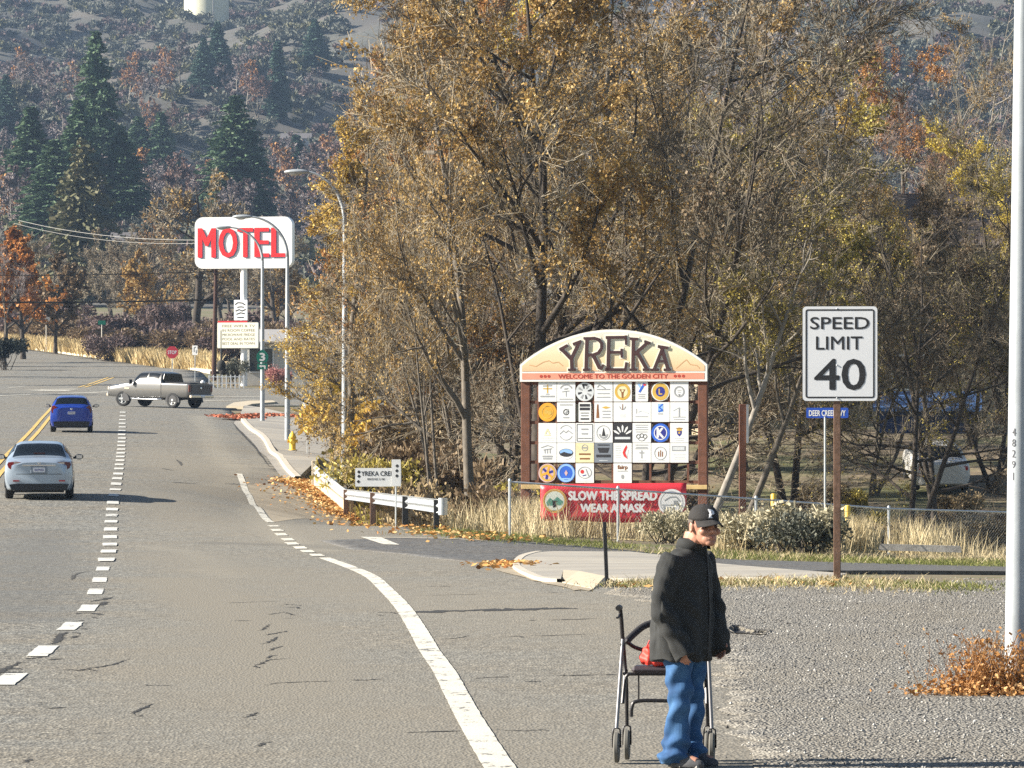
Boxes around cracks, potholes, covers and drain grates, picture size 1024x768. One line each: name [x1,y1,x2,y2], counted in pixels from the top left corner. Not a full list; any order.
crack [231,601,373,685]
